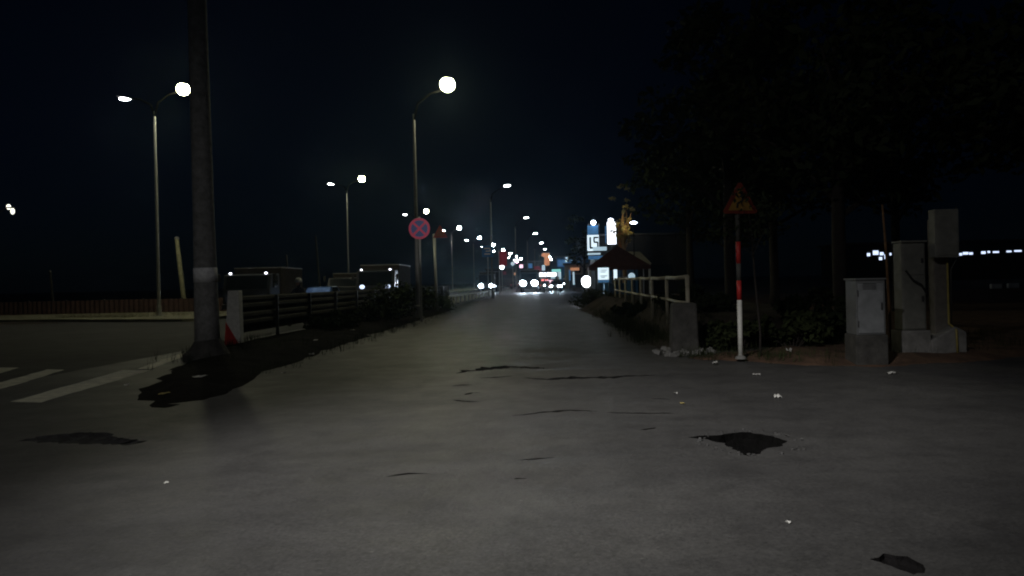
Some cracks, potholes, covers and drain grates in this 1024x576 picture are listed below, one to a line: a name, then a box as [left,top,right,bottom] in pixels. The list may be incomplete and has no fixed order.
pothole [689,428,805,457]
crack [607,398,677,430]
pothole [21,432,145,445]
crack [455,365,657,402]
pothole [871,553,925,575]
